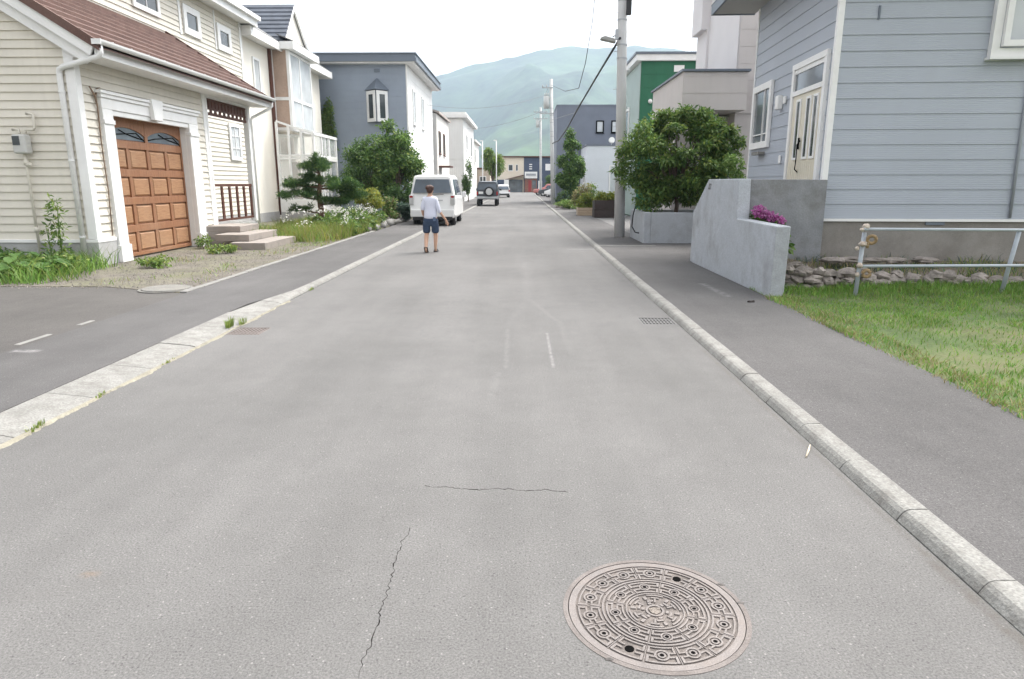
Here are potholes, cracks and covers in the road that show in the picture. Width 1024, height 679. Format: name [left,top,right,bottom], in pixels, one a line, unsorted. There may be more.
manhole cover [563,560,752,676]
drain grate [226,327,270,335]
manhole cover [137,284,192,294]
crack [359,528,410,672]
